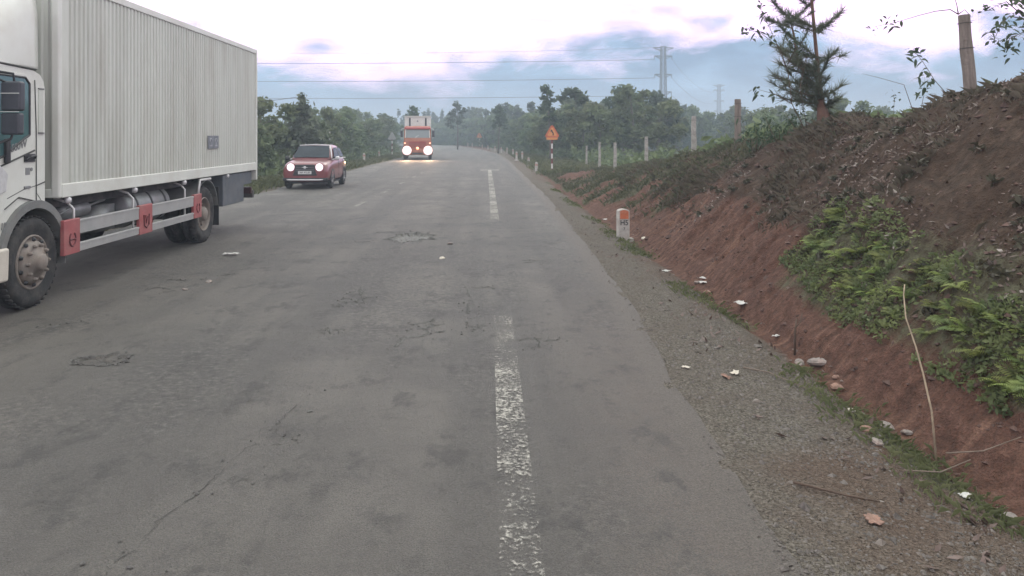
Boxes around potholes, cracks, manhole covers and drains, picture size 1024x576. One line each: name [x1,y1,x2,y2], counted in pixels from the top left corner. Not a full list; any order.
pothole [383,231,437,243]
crack [376,285,497,351]
pothole [69,351,135,366]
crack [326,286,377,309]
